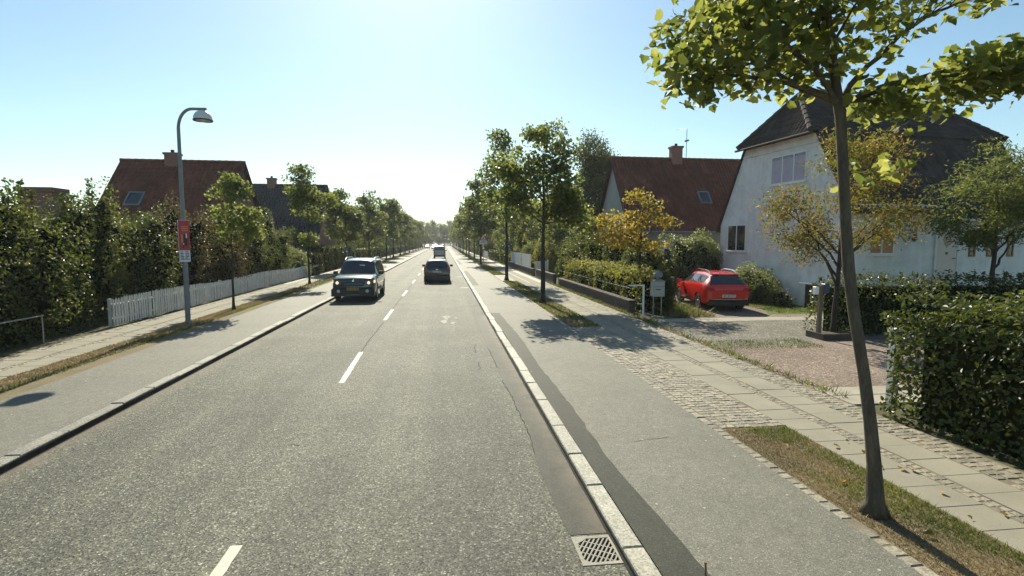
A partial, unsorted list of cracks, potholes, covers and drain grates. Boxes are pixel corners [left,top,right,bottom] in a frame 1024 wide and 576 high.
crack [474,345,535,453]
drain grate [571,535,624,566]
